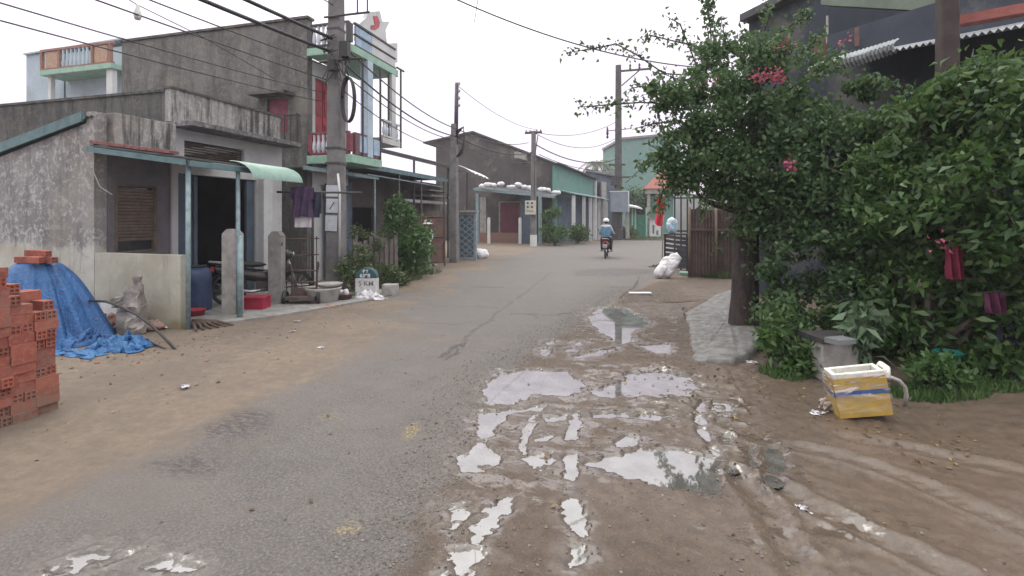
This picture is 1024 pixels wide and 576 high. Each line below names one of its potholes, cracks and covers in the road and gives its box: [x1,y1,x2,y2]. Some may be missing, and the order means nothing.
crack [619,278,642,300]
pothole [480,368,590,406]
pothole [758,441,795,491]
pothole [577,444,727,495]
pothole [586,306,652,345]
pothole [587,365,705,400]
